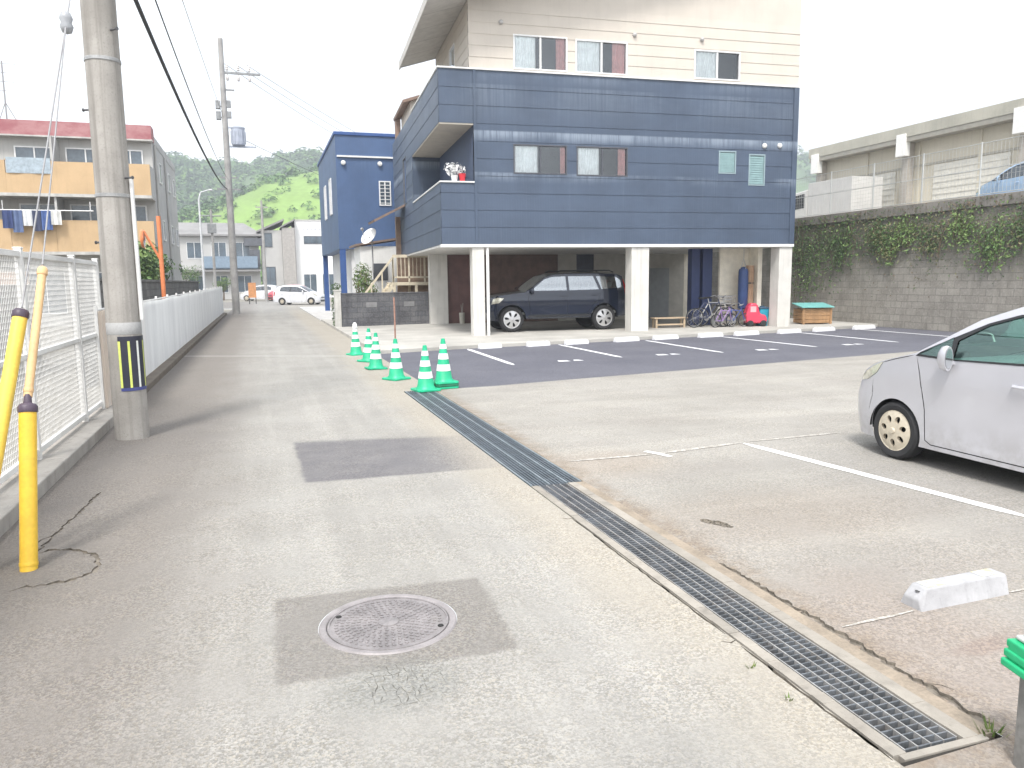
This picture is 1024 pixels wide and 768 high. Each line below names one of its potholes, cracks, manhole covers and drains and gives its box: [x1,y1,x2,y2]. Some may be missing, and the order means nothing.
crack [563,518,993,760]
pothole [700,519,733,528]
manhole cover [319,594,457,655]
crack [9,492,102,592]
crack [349,665,445,708]
